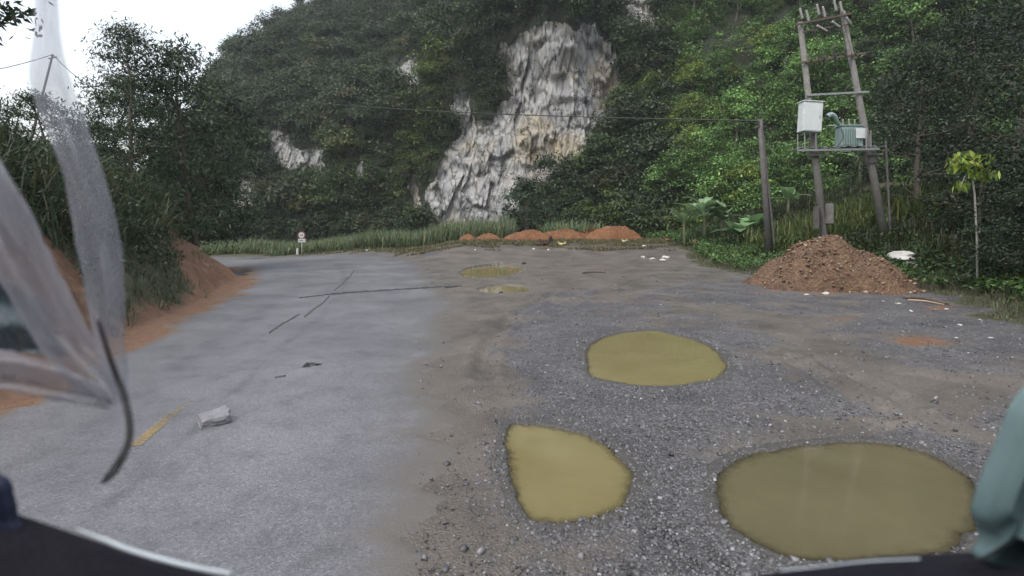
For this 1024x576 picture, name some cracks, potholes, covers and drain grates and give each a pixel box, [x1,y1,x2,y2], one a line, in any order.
pothole [459,265,526,278]
pothole [578,329,737,389]
pothole [699,436,980,568]
pothole [475,284,532,293]
pothole [493,418,649,533]
